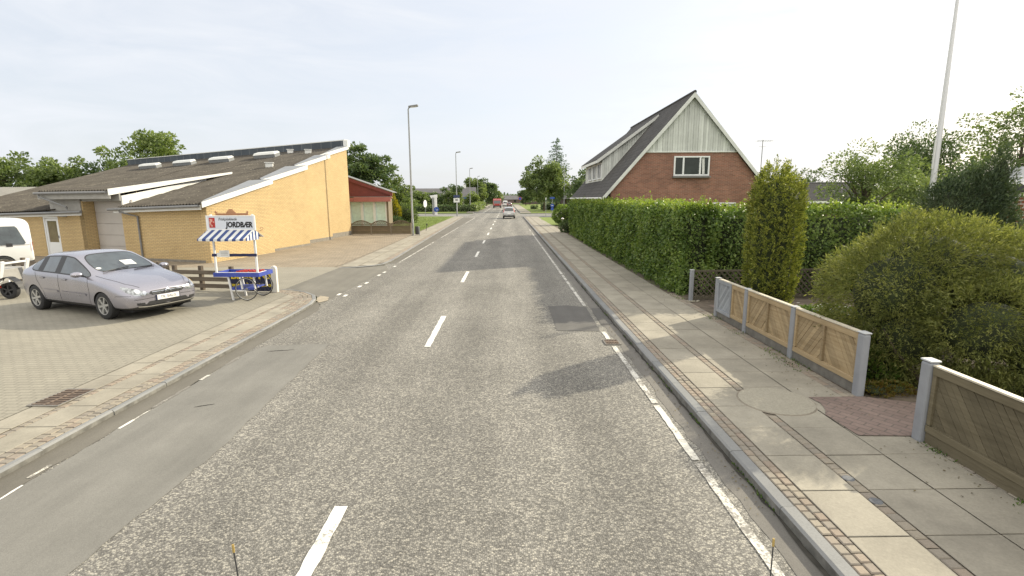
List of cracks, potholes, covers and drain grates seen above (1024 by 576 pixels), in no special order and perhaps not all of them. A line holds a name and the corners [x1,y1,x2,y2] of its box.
drain grate [26,388,97,407]
manhole cover [736,387,818,416]
